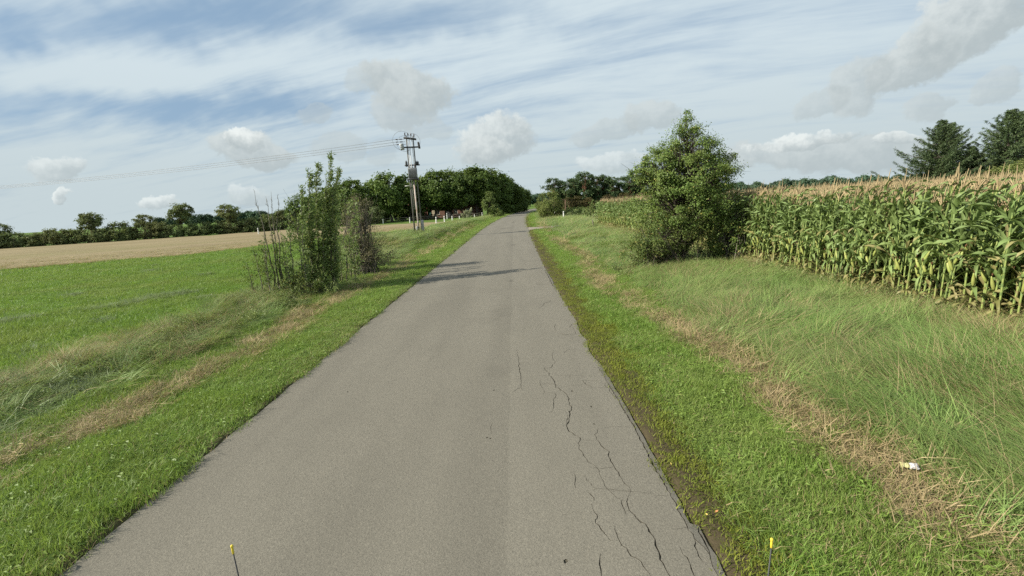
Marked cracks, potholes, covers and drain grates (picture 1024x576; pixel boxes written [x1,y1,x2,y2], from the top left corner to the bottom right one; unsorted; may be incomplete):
crack [540,356,718,576]
